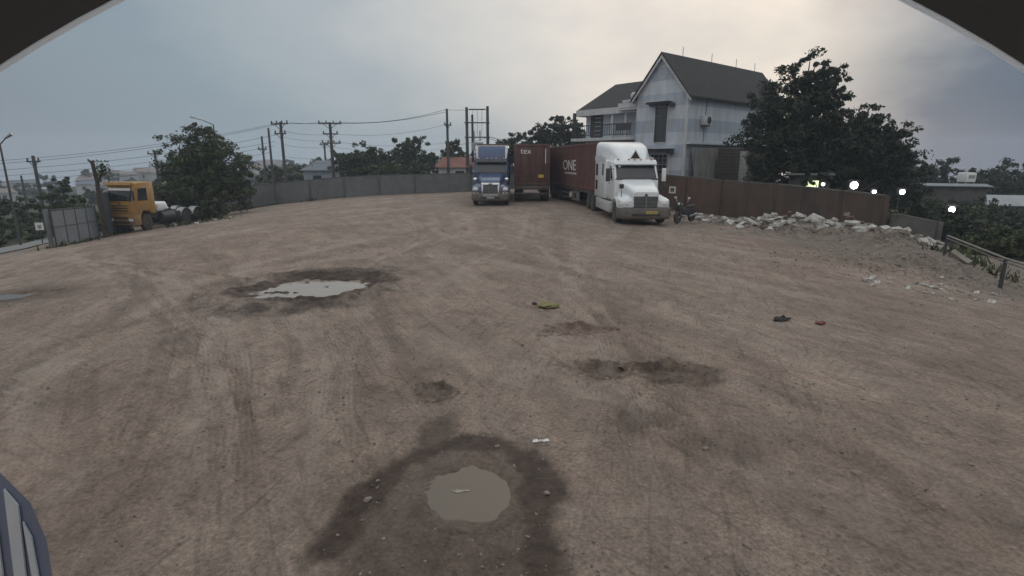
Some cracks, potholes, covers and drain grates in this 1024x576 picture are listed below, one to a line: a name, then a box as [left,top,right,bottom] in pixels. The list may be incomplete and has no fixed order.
pothole [533,320,620,337]
pothole [412,379,461,403]
pothole [201,268,400,307]
pothole [409,457,528,535]
pothole [573,358,636,380]
